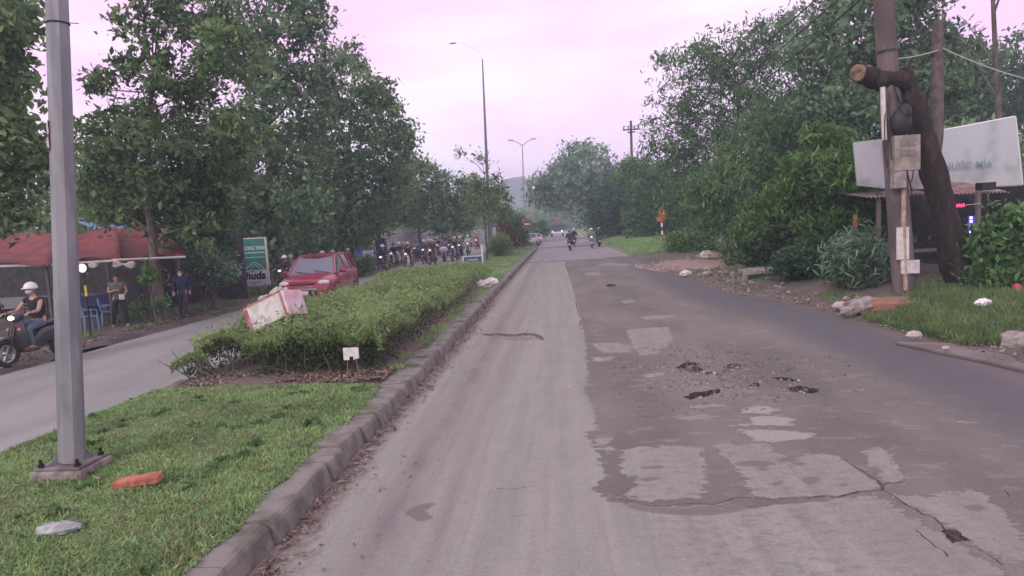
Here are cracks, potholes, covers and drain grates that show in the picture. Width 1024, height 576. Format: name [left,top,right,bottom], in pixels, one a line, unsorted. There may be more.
crack [614,461,1003,566]
pothole [676,362,703,373]
pothole [684,389,720,400]
pothole [787,386,819,394]
